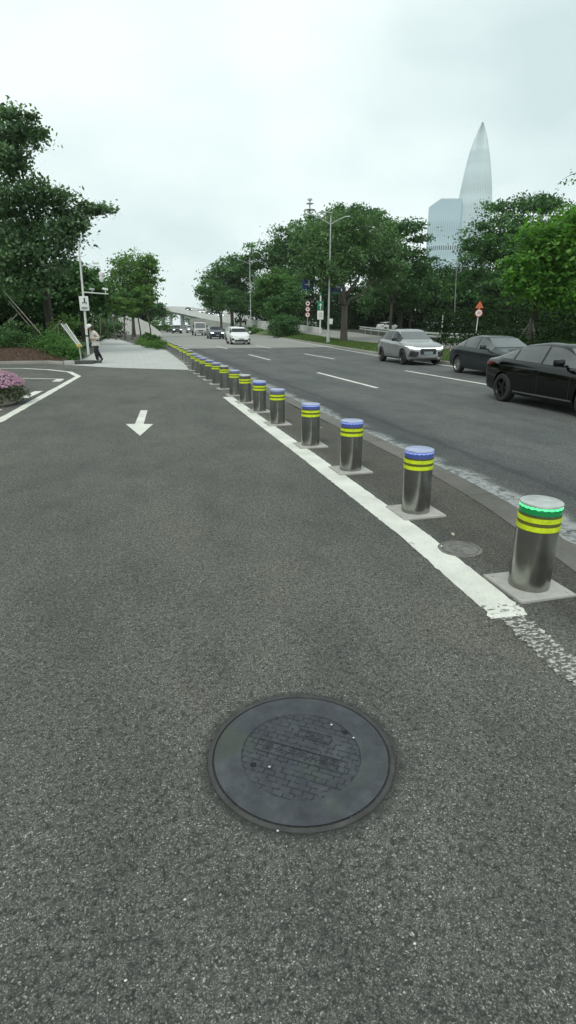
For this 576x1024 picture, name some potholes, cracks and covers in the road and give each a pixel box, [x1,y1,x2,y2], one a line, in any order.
manhole cover [438,540,482,558]
manhole cover [208,695,395,834]
